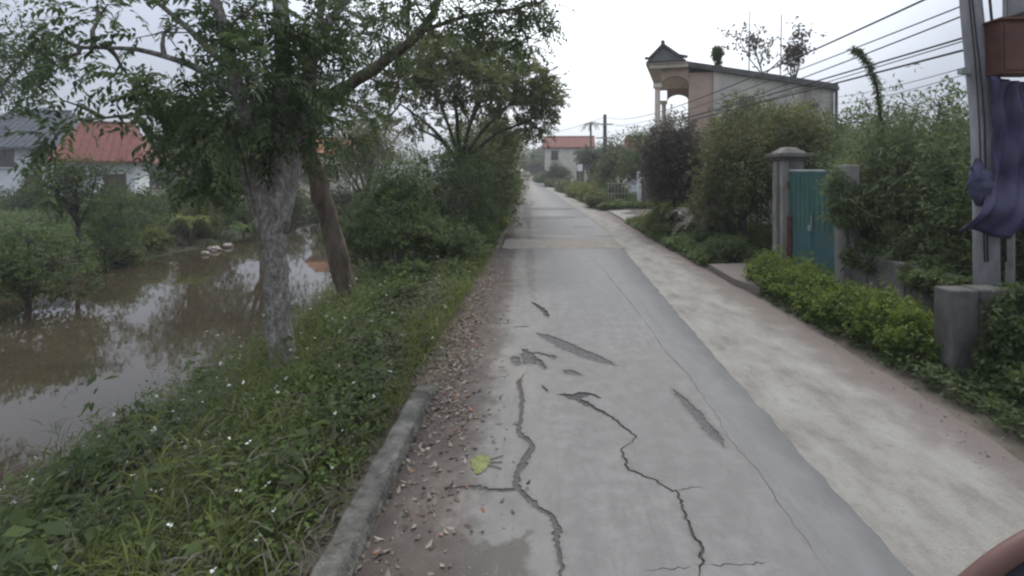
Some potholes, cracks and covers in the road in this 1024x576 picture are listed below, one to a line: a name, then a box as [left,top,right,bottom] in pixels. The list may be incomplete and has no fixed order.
pothole [521,349,549,370]
crack [455,255,822,576]
